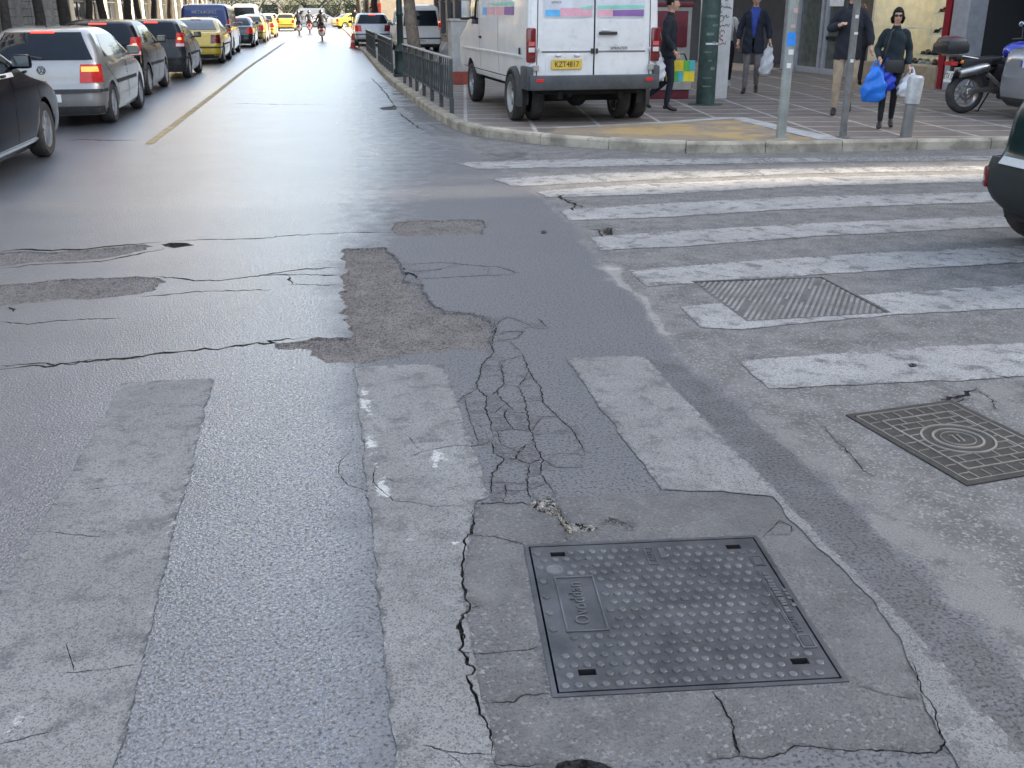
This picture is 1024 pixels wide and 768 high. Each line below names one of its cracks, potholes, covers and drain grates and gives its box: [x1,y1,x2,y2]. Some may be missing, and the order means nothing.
crack [338,317,585,767]
crack [0,337,302,370]
crack [0,232,386,269]
crack [702,664,948,764]
manhole cover [524,535,850,698]
crack [941,376,1013,408]
manhole cover [846,400,1024,486]
crack [145,267,339,297]
